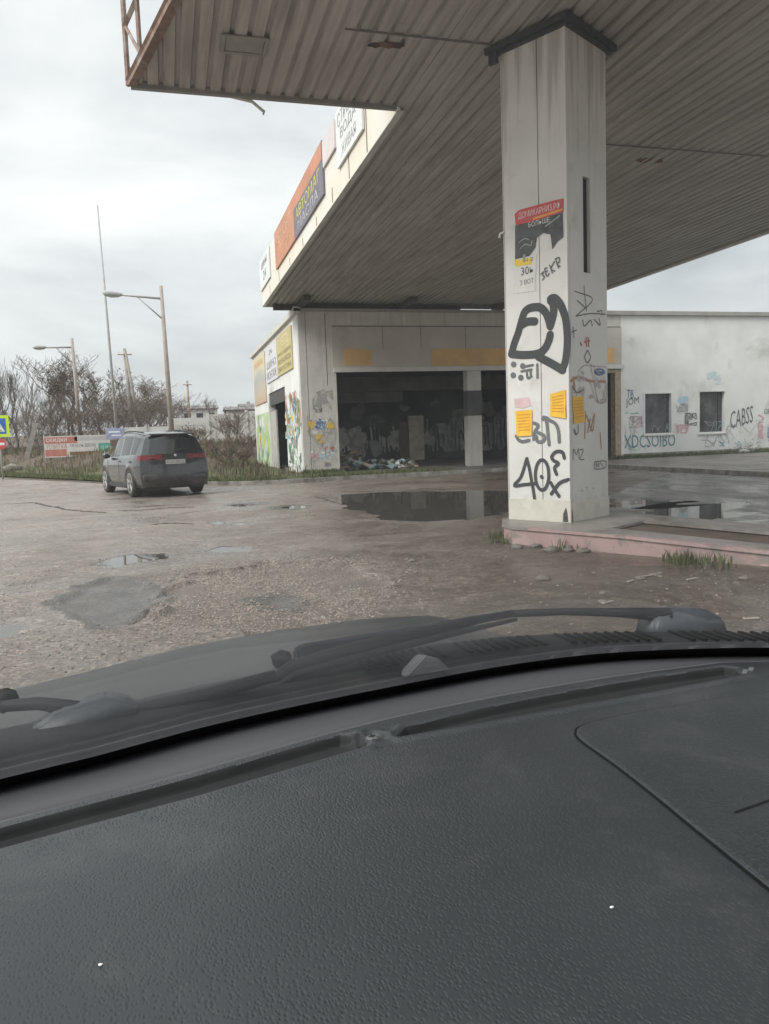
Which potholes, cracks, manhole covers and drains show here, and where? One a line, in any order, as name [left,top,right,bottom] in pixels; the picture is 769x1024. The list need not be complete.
crack [14,502,192,525]
